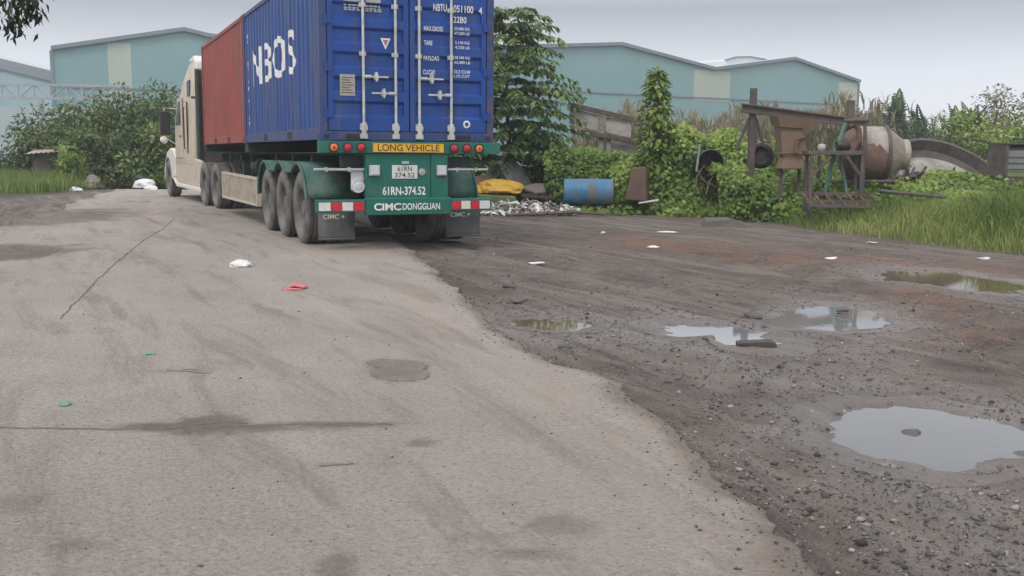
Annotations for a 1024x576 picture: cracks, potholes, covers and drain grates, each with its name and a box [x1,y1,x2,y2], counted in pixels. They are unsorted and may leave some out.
pothole [495,314,613,334]
pothole [623,317,818,358]
crack [60,218,175,320]
pothole [852,265,1024,298]
pothole [780,395,1024,487]
pothole [737,301,920,335]
